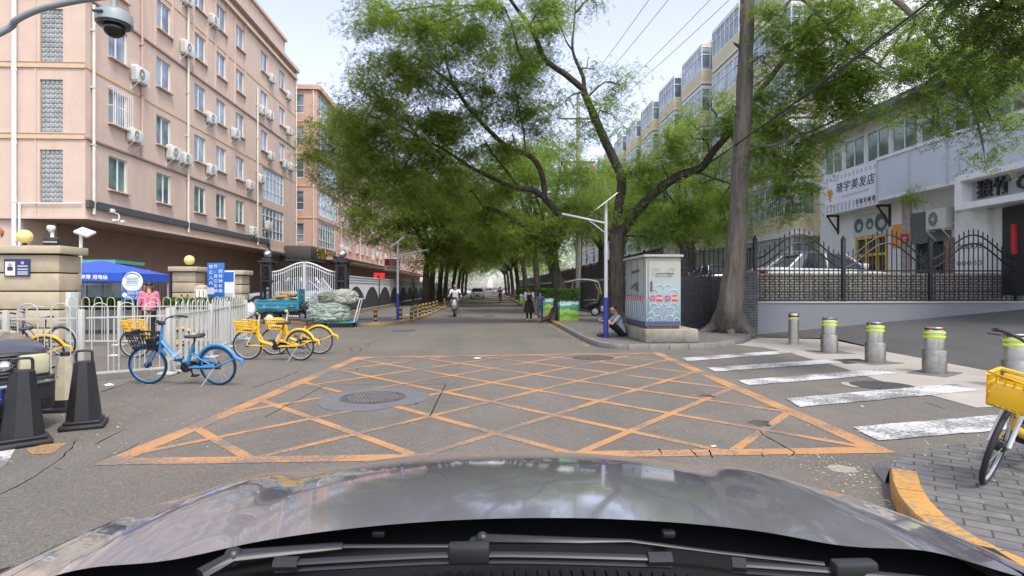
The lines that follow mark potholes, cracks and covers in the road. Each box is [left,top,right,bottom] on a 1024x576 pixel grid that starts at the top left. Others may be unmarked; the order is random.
manhole cover [316,388,430,411]
crack [0,440,76,495]
